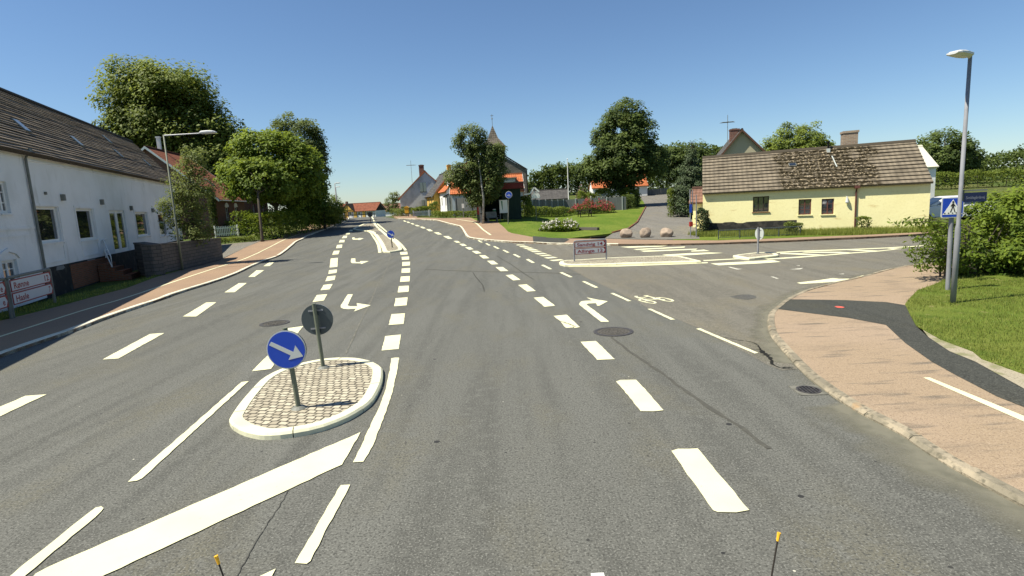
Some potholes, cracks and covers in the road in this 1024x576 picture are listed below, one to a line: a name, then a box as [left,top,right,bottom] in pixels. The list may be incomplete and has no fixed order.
drain grate [788,385,829,396]
crack [725,337,781,368]
crack [237,491,288,576]
manhole cover [593,327,633,337]
